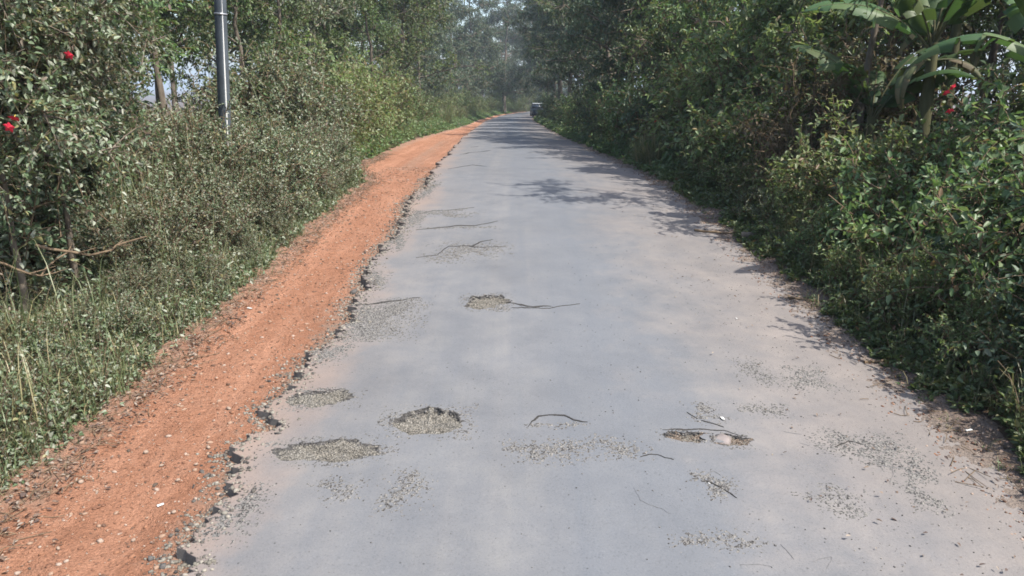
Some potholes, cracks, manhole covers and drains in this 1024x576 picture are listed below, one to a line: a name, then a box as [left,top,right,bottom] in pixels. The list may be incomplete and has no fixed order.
crack [401,207,502,258]
pothole [700,431,765,450]
pothole [371,402,480,441]
pothole [246,433,404,469]
pothole [647,428,731,447]
pothole [274,387,368,412]
crack [528,414,587,427]
pothole [457,292,515,312]
